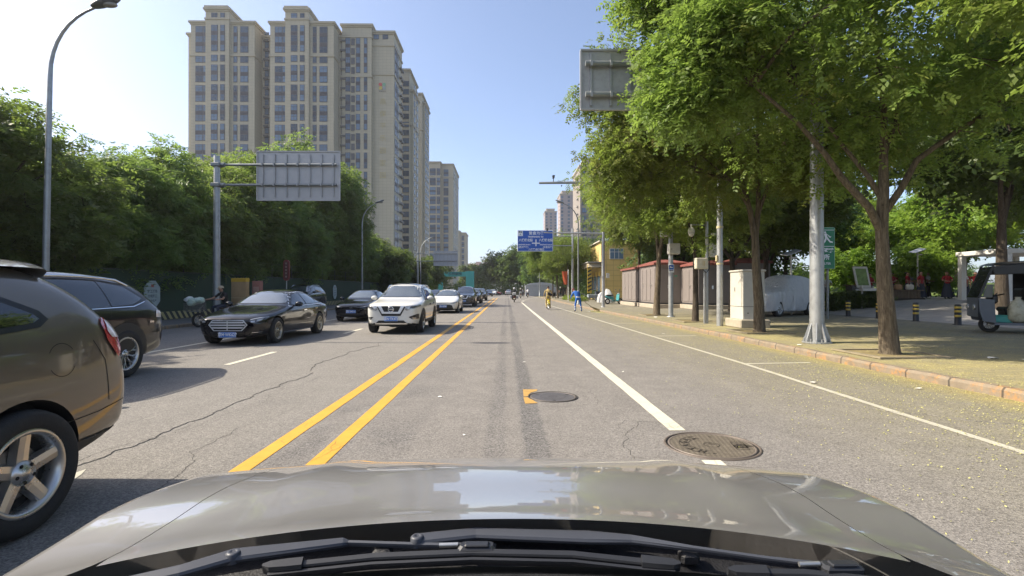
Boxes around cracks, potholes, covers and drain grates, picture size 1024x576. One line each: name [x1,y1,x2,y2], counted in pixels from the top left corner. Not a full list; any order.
crack [77,334,401,490]
crack [519,385,679,459]
manhole cover [528,391,578,402]
manhole cover [663,432,763,461]
